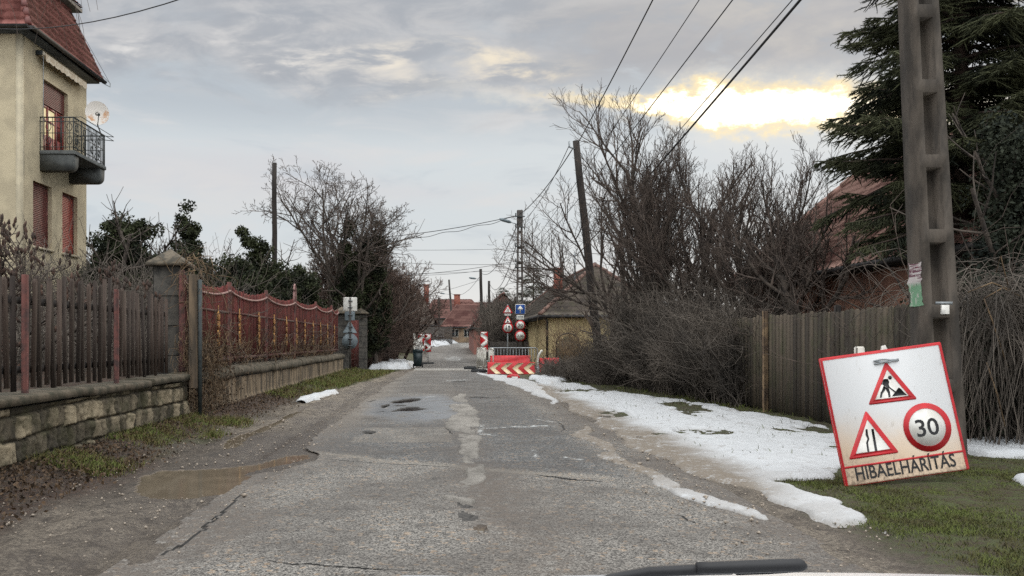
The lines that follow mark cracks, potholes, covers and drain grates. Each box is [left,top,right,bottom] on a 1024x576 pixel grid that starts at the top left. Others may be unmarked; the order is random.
pothole [458,511,479,521]
crack [269,560,429,571]
